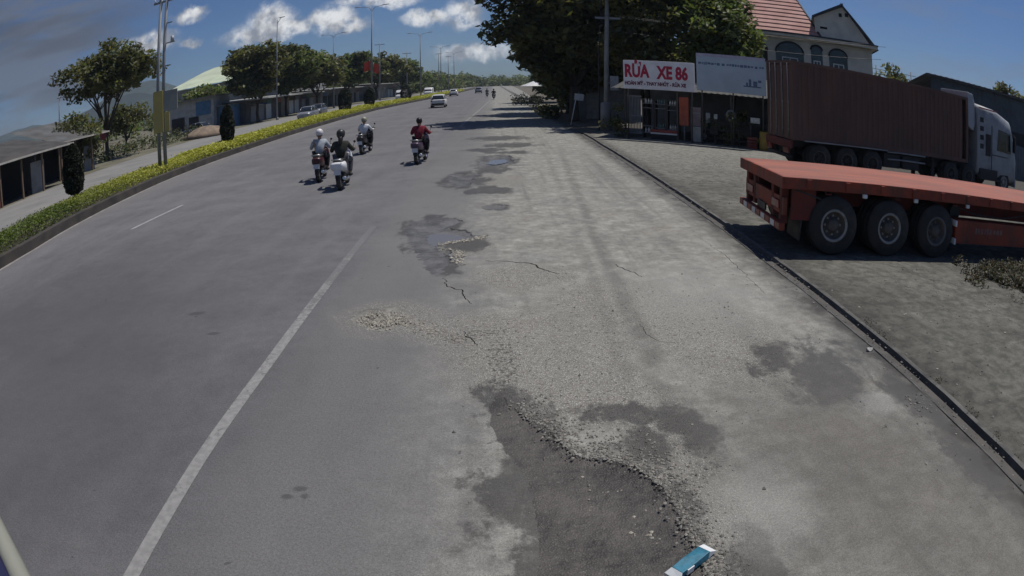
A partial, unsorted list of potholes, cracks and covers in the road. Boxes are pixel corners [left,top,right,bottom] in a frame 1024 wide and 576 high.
pothole [489,390,708,576]
pothole [477,155,514,168]
pothole [447,173,481,187]
pothole [351,306,425,331]
pothole [403,217,481,275]
